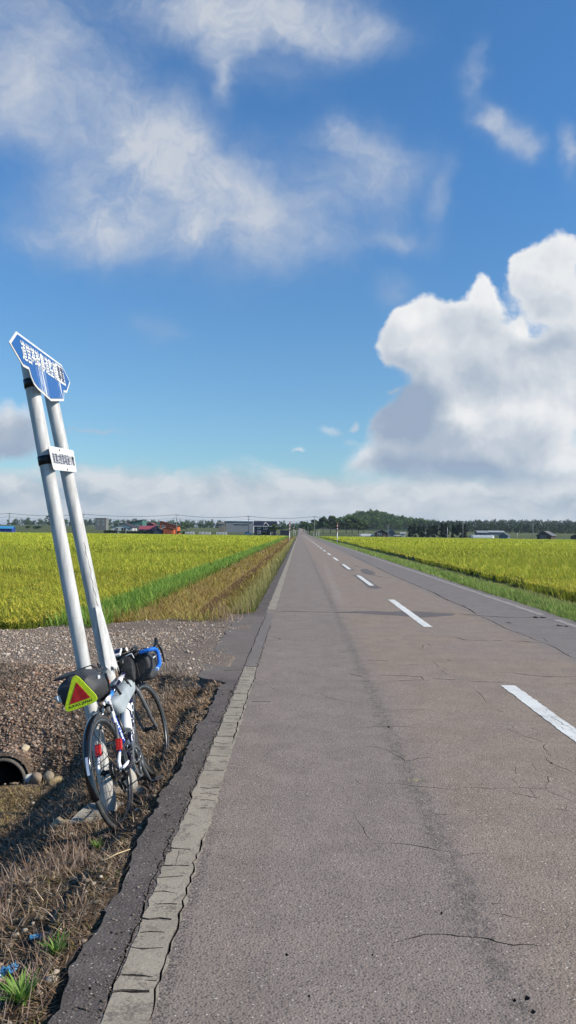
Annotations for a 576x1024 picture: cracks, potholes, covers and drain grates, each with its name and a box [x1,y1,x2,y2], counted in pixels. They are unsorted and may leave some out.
crack [335,643,575,811]
crack [398,934,537,946]
